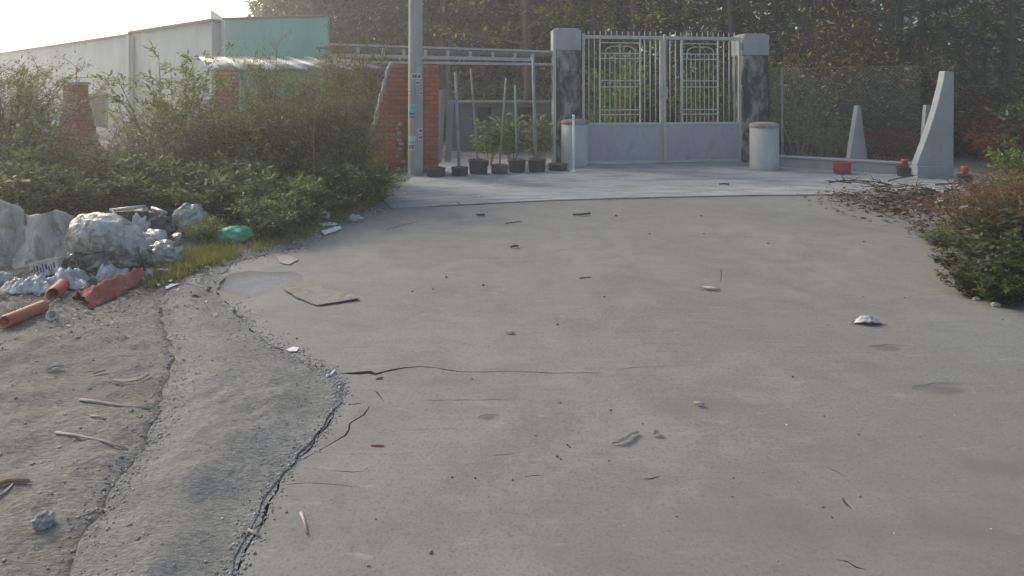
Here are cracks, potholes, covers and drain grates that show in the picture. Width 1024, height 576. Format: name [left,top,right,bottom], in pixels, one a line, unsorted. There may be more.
crack [286,366,588,487]
